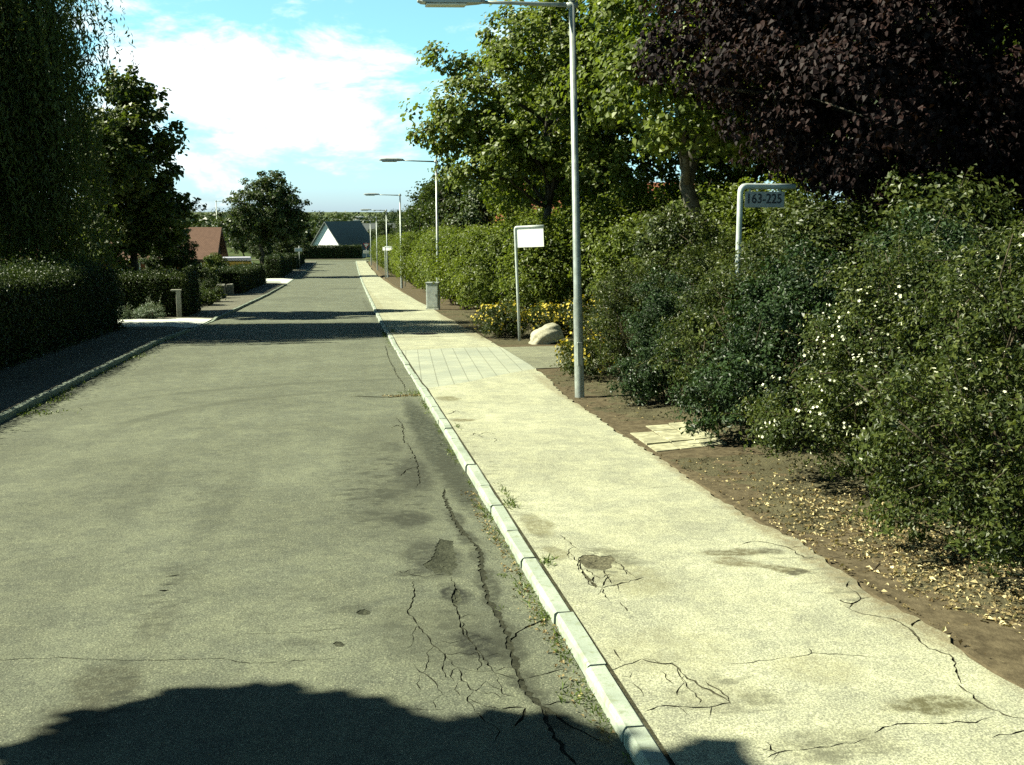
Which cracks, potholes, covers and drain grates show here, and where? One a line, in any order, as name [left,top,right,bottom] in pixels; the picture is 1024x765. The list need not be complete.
pothole [578,555,615,570]
pothole [423,539,458,576]
crack [399,489,868,765]
crack [756,582,1024,760]
crack [394,421,421,486]
